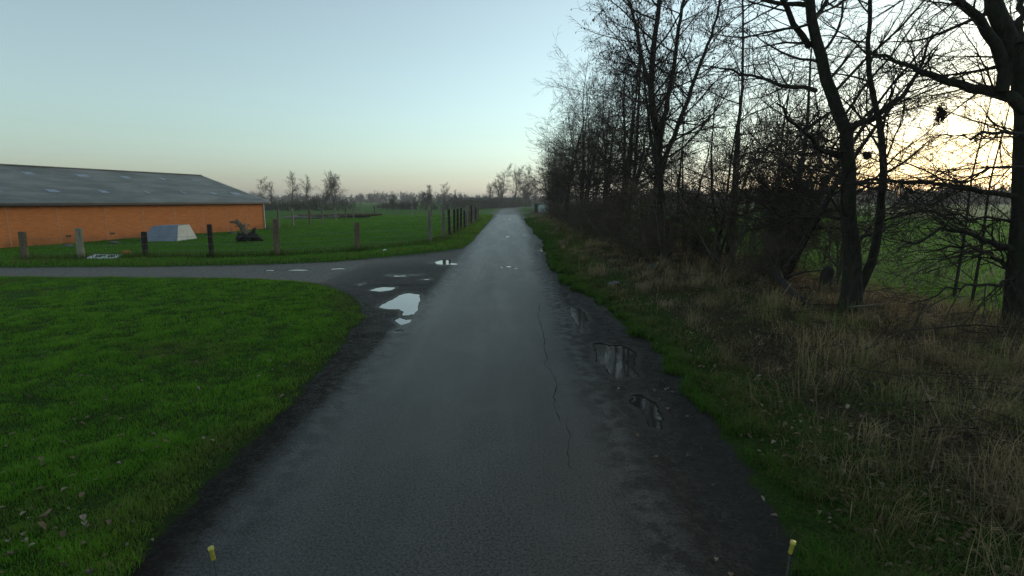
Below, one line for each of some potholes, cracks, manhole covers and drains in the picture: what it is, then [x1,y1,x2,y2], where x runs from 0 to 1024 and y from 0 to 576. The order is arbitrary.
pothole [593,342,639,379]
pothole [566,307,589,333]
pothole [629,394,664,430]
crack [538,304,571,465]
